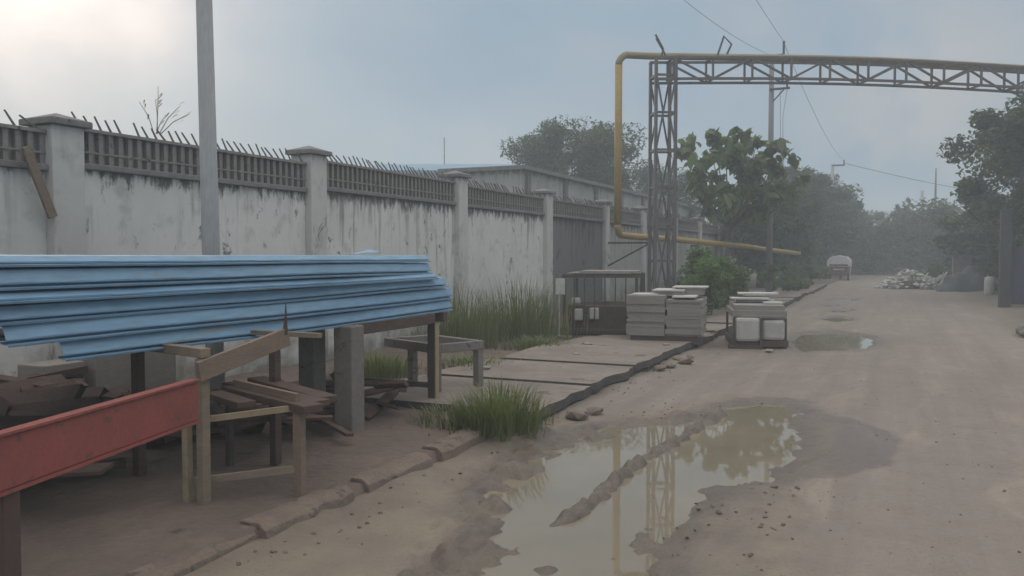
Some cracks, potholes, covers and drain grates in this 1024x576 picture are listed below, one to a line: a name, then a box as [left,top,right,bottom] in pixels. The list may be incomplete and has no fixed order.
pothole [813,315,858,323]
pothole [397,397,829,576]
pothole [787,329,884,353]
